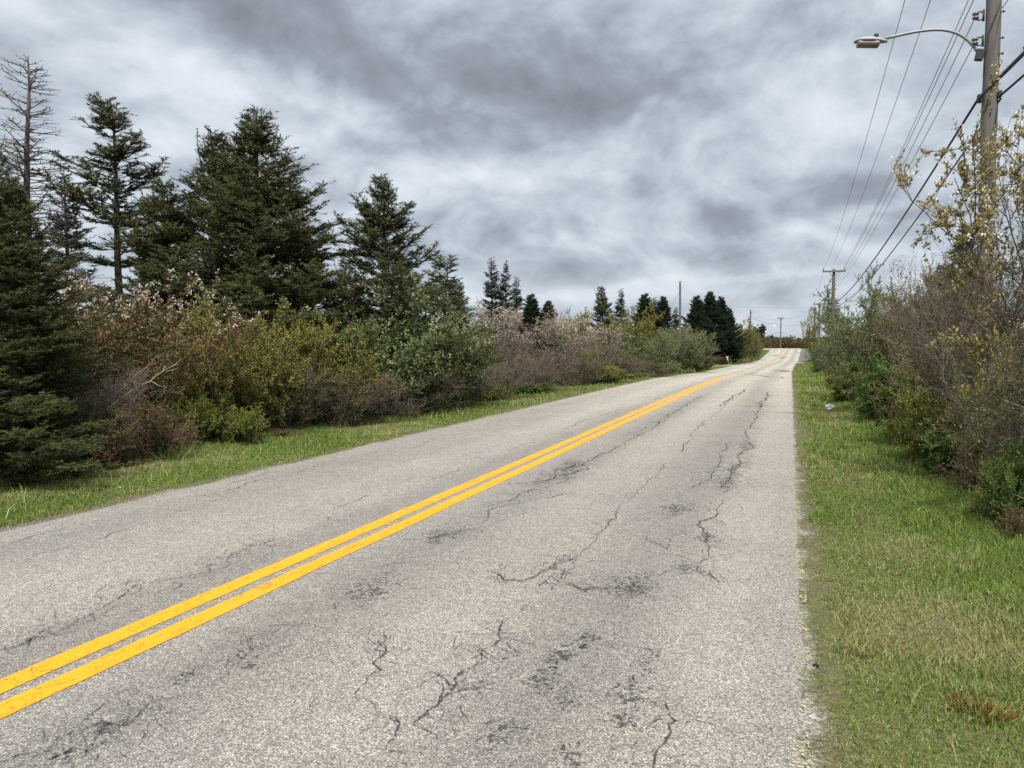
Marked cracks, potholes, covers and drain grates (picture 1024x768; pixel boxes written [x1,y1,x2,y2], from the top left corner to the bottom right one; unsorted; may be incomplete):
crack [2,689,182,768]
crack [309,613,533,753]
crack [0,532,280,650]
crack [603,672,738,768]
crack [399,373,784,591]
